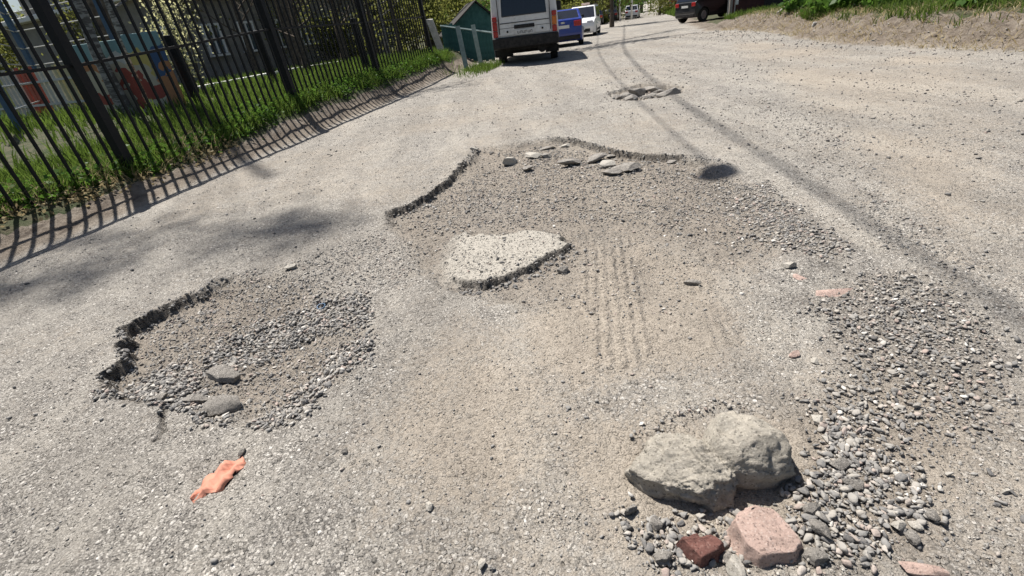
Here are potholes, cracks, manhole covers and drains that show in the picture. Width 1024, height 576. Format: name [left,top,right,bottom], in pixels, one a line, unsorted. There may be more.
pothole [379,137,817,330]
pothole [604,83,687,101]
pothole [93,267,390,435]
